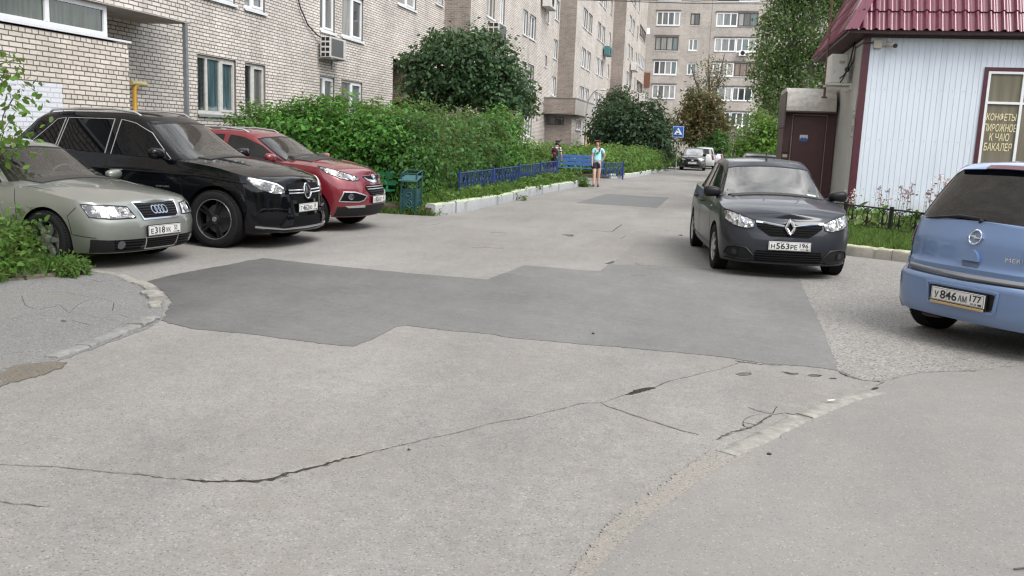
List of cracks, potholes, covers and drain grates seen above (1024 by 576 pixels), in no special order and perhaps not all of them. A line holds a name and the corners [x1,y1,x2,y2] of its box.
crack [655,360,781,387]
crack [0,394,795,483]
